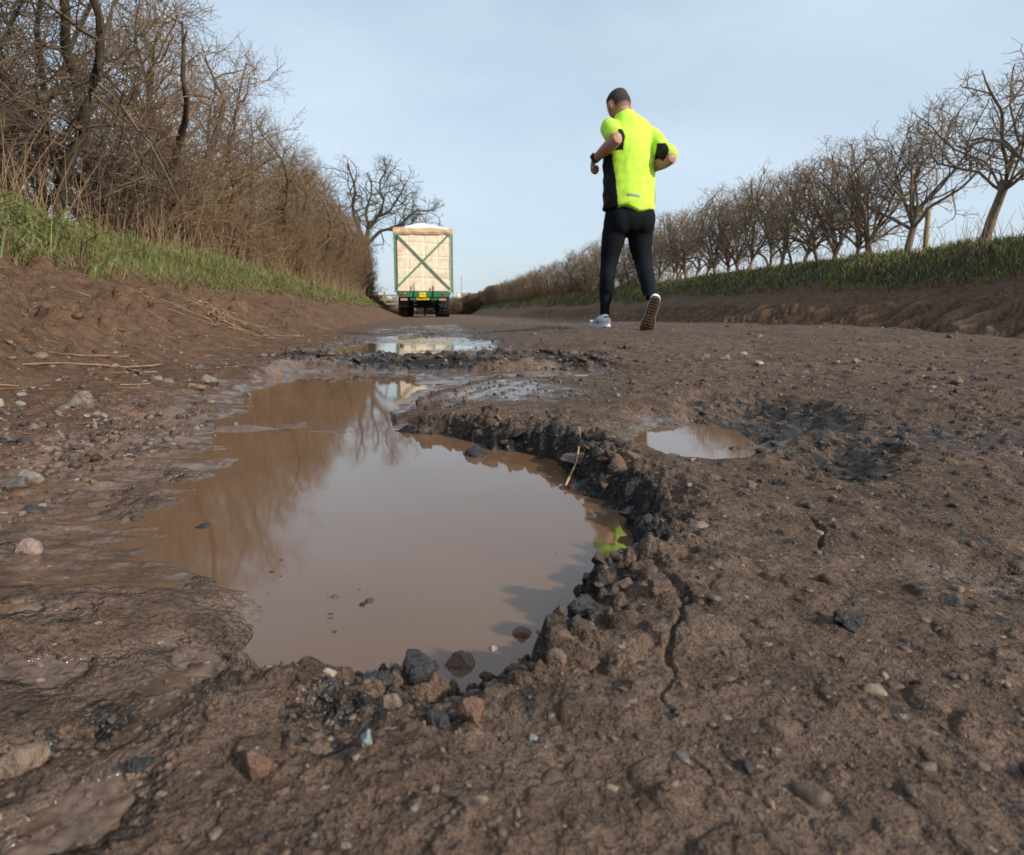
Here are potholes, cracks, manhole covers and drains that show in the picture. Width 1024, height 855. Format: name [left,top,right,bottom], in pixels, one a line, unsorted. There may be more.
pothole [674,389,866,445]
crack [616,559,732,801]
pothole [321,335,506,355]
pothole [192,357,624,430]
pothole [602,409,792,459]
pothole [775,433,913,483]
pothole [82,407,705,708]
